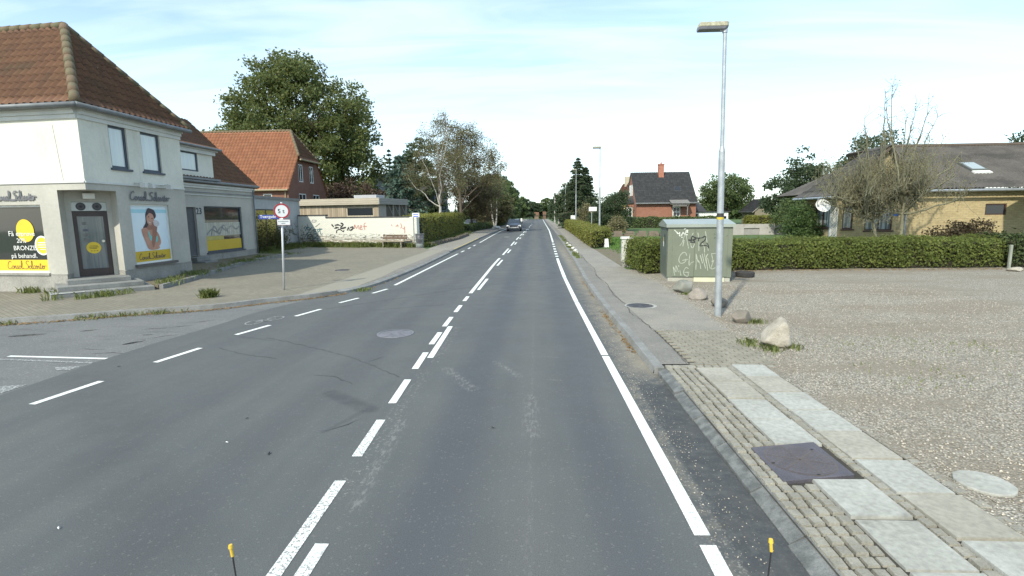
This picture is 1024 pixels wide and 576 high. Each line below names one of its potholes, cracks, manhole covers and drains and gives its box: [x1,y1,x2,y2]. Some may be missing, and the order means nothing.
crack [221,338,399,377]
manhole cover [377,329,414,338]
manhole cover [751,442,854,484]
